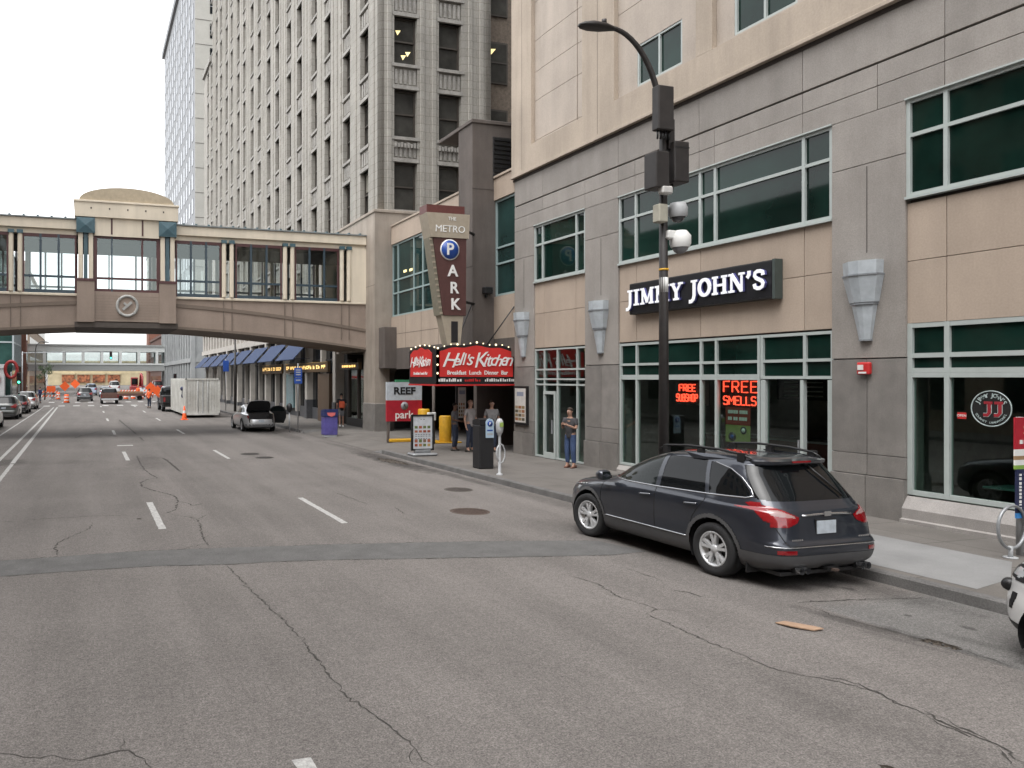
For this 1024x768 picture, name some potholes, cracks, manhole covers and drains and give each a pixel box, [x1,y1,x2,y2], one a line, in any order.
crack [2,420,657,766]
crack [562,574,1023,767]
pothole [919,638,962,650]
